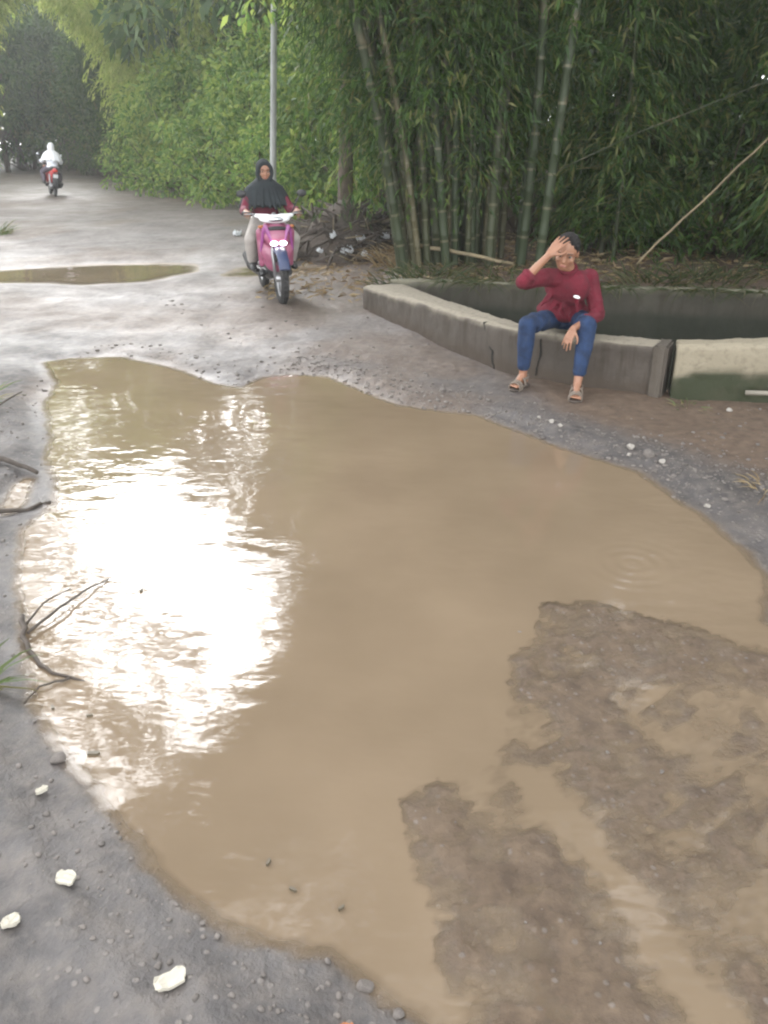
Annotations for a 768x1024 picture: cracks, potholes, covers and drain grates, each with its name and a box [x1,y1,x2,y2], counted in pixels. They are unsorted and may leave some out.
pothole [0,261,207,287]
pothole [0,353,768,1024]
